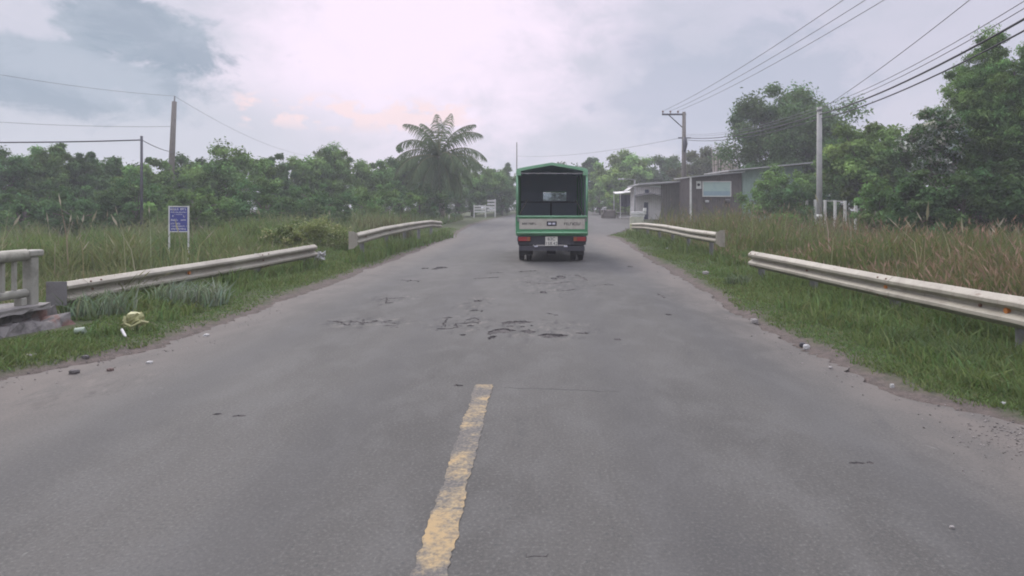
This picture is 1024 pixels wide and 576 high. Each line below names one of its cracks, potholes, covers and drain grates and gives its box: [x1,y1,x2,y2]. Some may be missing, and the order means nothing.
crack [333,280,422,326]
pothole [487,320,536,340]
crack [436,317,481,331]
crack [474,270,613,291]
